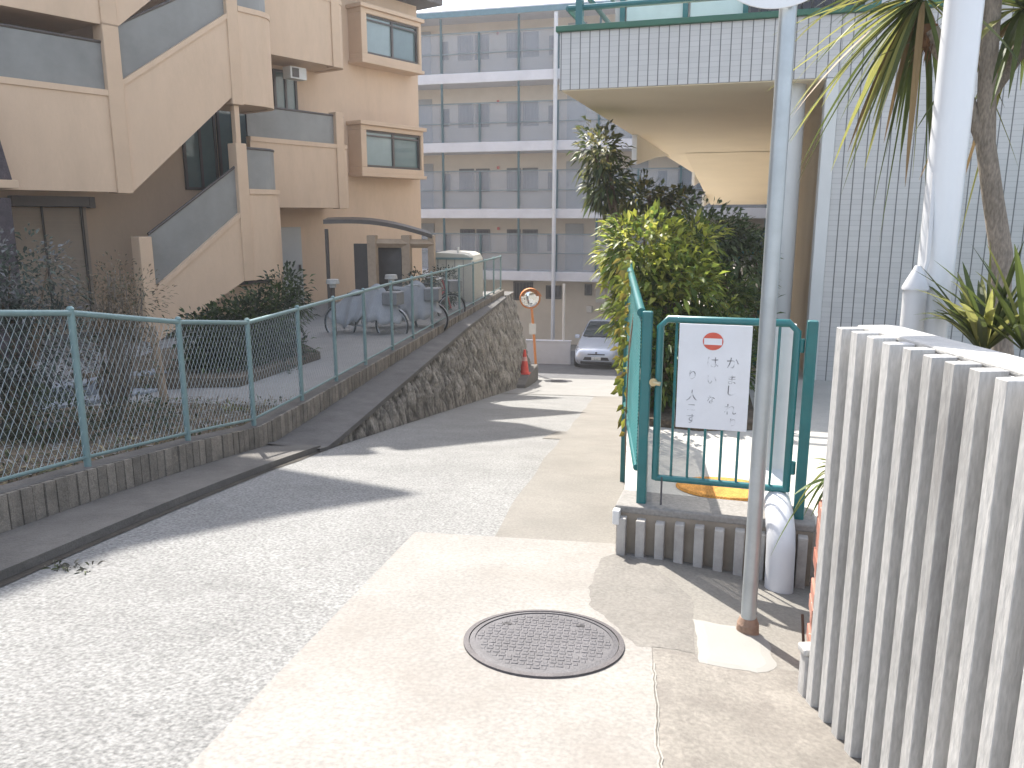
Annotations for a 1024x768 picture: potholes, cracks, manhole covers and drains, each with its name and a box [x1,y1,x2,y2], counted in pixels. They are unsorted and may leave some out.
manhole cover [463,609,625,679]
